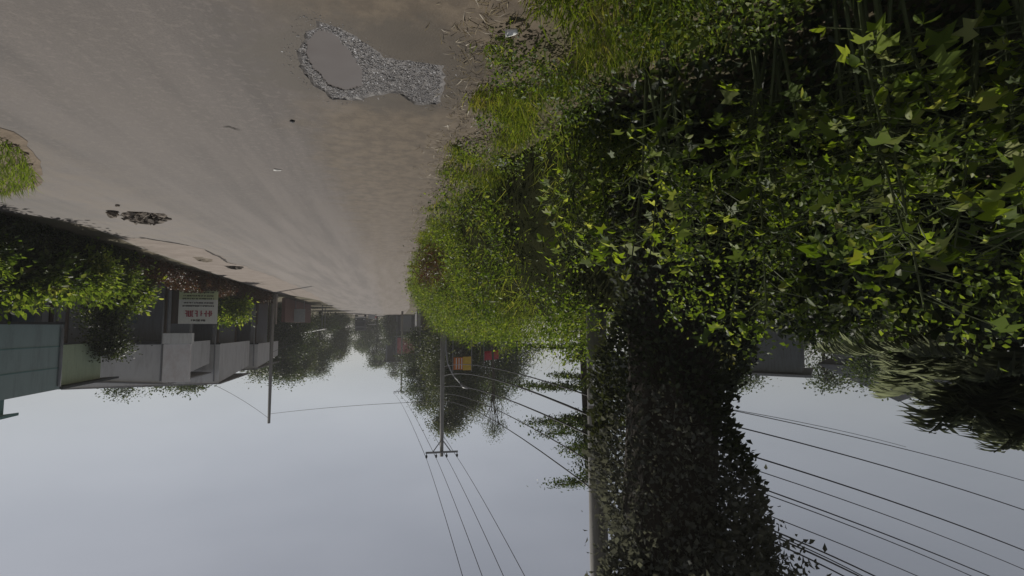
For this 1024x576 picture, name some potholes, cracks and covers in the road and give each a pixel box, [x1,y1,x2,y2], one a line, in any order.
pothole [281,12,455,110]
pothole [120,211,172,225]
